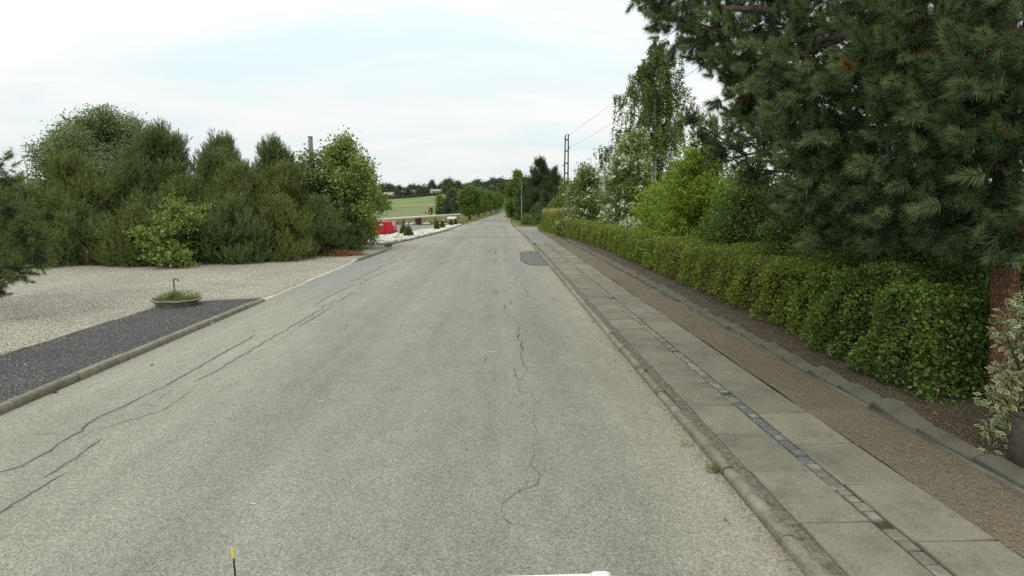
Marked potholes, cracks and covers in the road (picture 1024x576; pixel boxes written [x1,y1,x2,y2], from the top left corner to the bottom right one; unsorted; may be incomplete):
crack [489,287,555,526]
crack [0,249,407,513]
